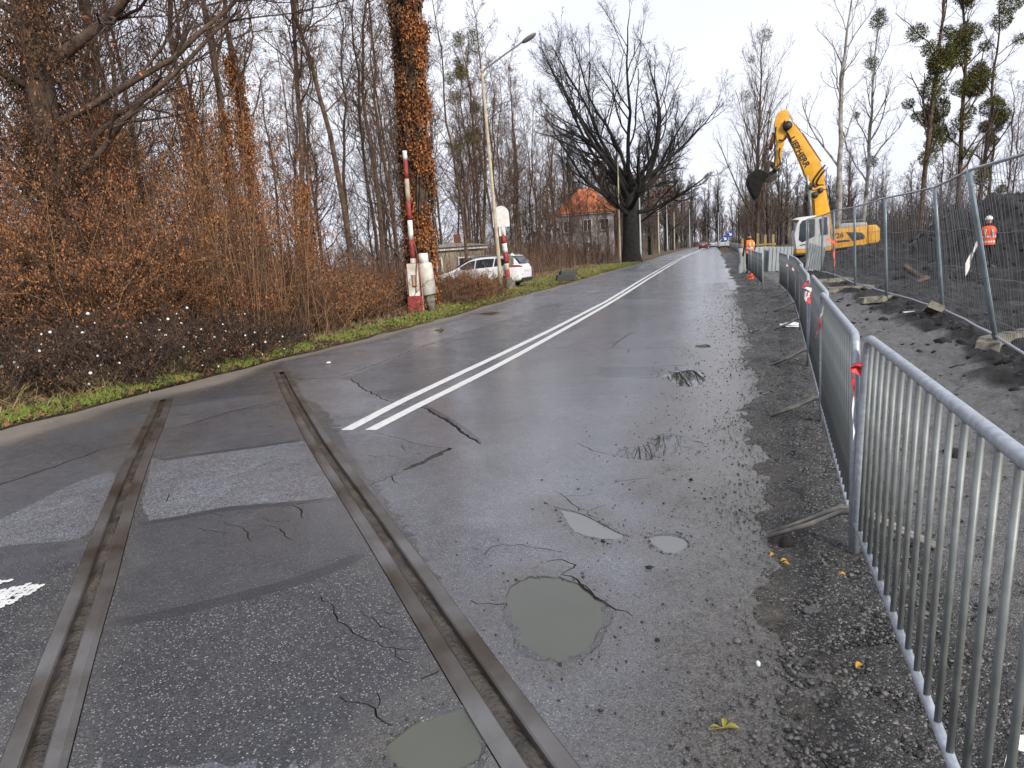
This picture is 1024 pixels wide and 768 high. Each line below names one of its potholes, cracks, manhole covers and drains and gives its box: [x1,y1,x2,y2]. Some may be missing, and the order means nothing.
crack [369,433,450,485]
pothole [647,533,689,553]
crack [547,559,633,617]
pothole [385,705,486,768]
crack [321,596,438,679]
pothole [615,433,704,461]
pothole [502,575,614,664]
crack [340,694,392,727]
pothole [661,367,706,387]
pothole [555,507,624,540]
crack [199,499,318,541]
